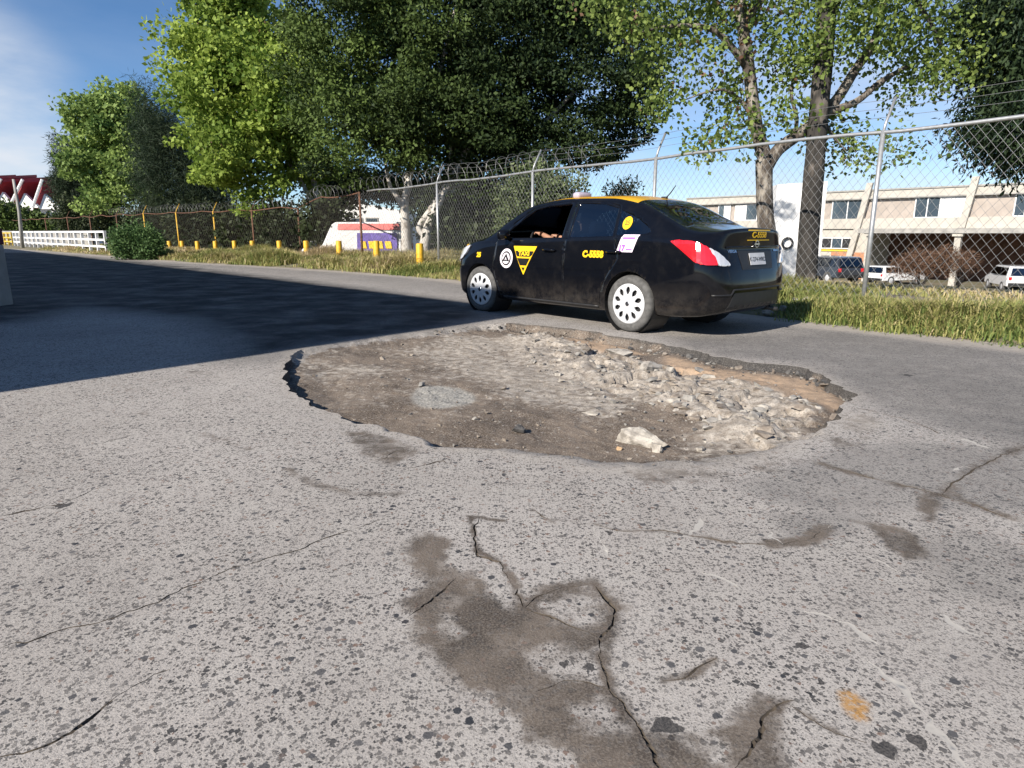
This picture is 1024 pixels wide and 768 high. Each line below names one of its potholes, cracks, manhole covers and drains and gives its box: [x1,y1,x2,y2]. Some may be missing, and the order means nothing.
crack [1,519,381,648]
crack [0,669,170,757]
crack [831,408,1023,524]
pothole [282,323,858,473]
crack [408,578,456,617]
crack [473,519,715,768]
